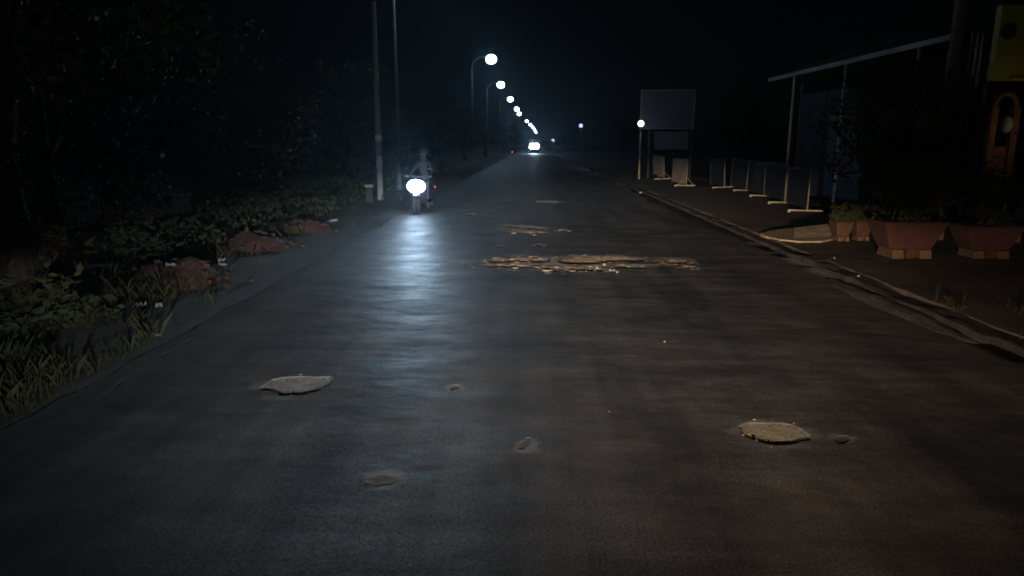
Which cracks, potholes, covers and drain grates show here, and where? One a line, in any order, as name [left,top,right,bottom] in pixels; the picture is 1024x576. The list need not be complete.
pothole [832,434,853,444]
pothole [360,474,400,487]
pothole [257,374,336,398]
pothole [535,255,655,265]
pothole [541,266,567,274]
pothole [517,434,532,450]
pothole [660,257,699,265]
pothole [725,418,817,450]
